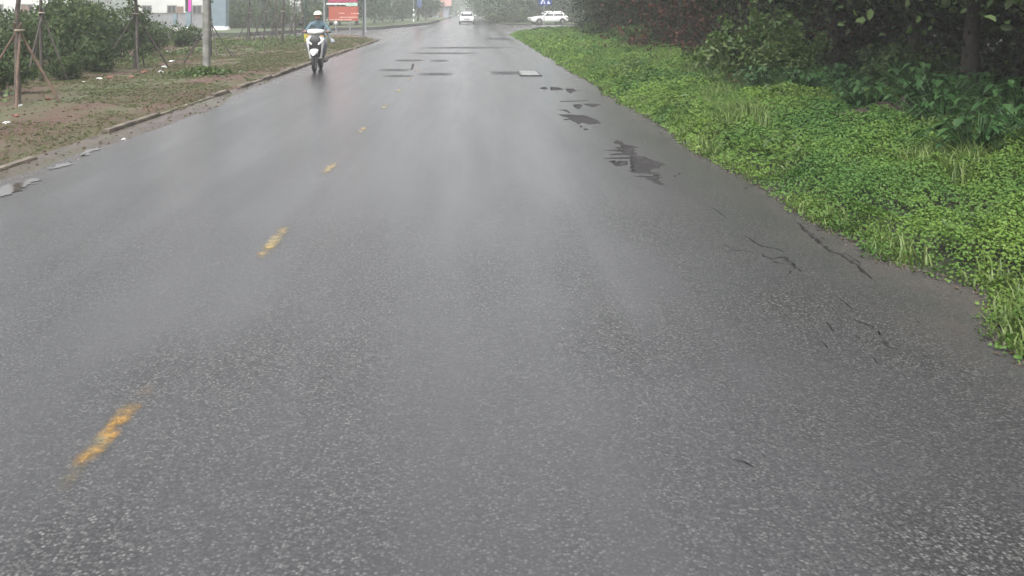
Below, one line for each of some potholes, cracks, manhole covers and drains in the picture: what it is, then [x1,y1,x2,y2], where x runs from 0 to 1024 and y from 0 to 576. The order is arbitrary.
pothole [601,140,667,185]
pothole [559,114,601,125]
crack [724,222,875,281]
crack [820,297,894,364]
